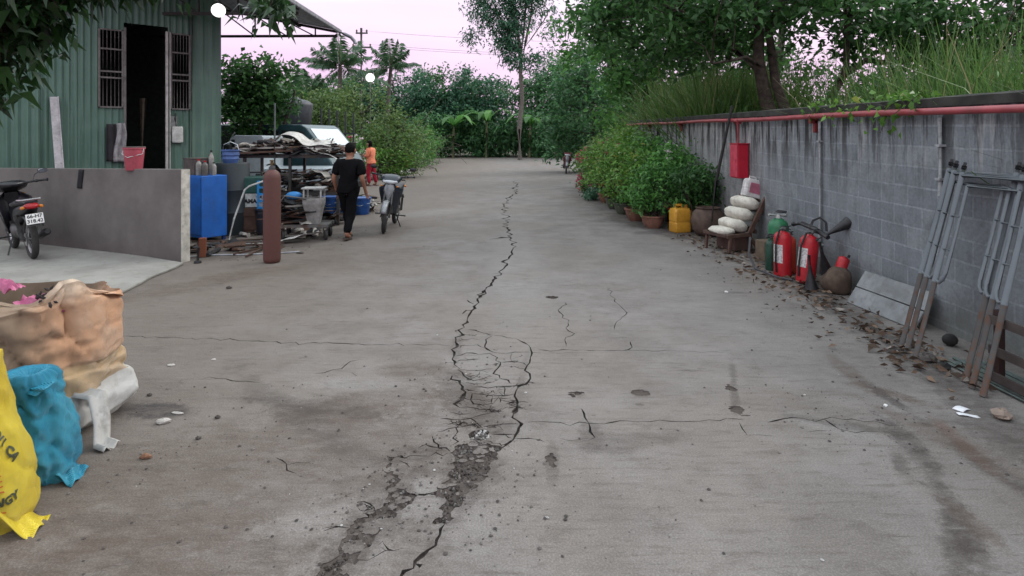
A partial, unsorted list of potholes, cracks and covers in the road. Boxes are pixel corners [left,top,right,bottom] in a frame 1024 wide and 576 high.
pothole [432,443,502,524]
pothole [316,456,417,576]
crack [322,182,900,576]
pothole [728,406,751,416]
